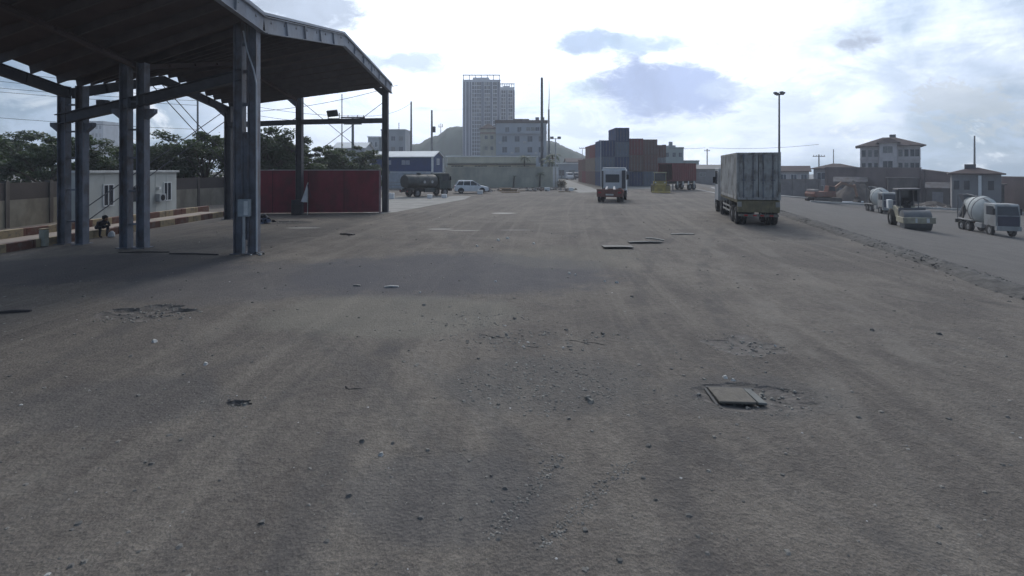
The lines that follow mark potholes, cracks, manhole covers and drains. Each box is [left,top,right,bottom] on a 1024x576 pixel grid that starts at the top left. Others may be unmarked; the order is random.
pothole [698,334,788,358]
pothole [95,303,196,323]
pothole [225,399,252,407]
manhole cover [704,386,767,406]
